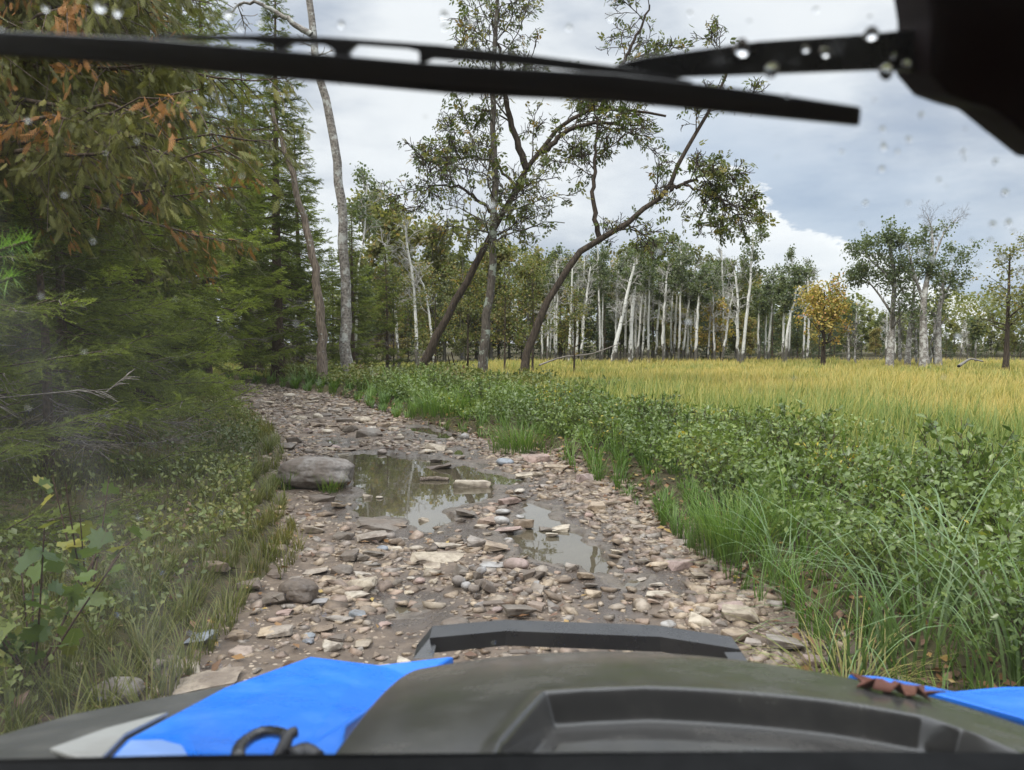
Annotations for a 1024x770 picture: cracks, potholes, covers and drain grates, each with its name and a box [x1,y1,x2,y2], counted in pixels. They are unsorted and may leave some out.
pothole [324,451,534,535]
pothole [485,500,627,578]
